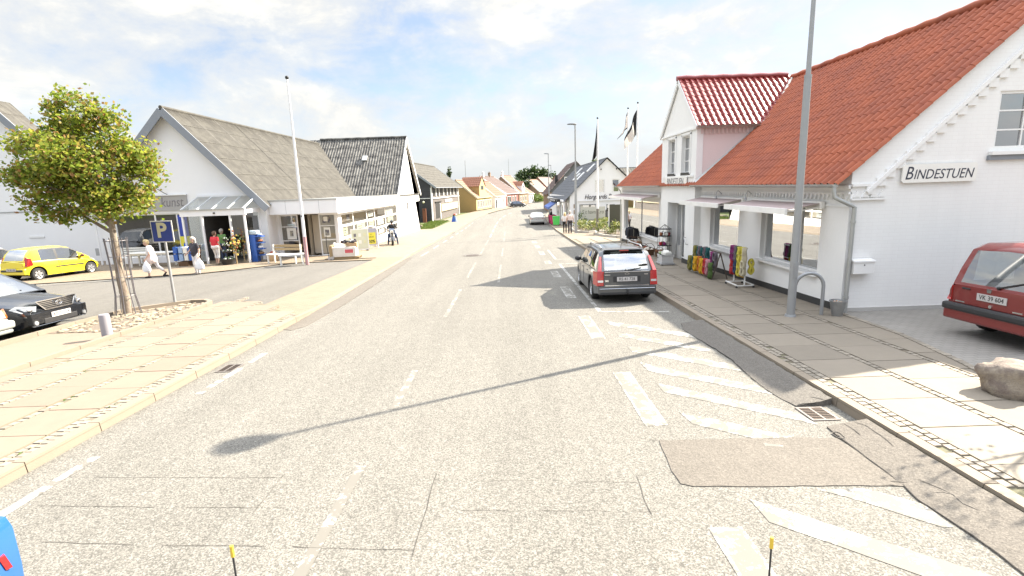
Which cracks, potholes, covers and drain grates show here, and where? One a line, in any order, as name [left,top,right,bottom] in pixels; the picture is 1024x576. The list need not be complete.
drain grate [214,364,244,373]
crack [554,475,656,514]
drain grate [795,406,841,421]
